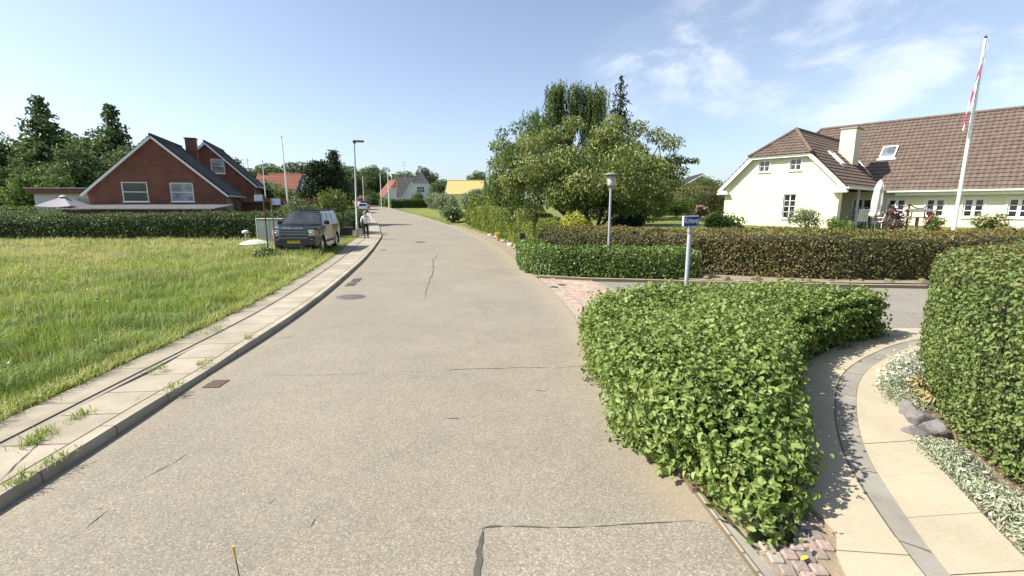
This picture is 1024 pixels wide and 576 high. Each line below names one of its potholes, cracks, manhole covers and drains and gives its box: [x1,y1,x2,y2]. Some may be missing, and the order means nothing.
drain grate [202,380,229,388]
